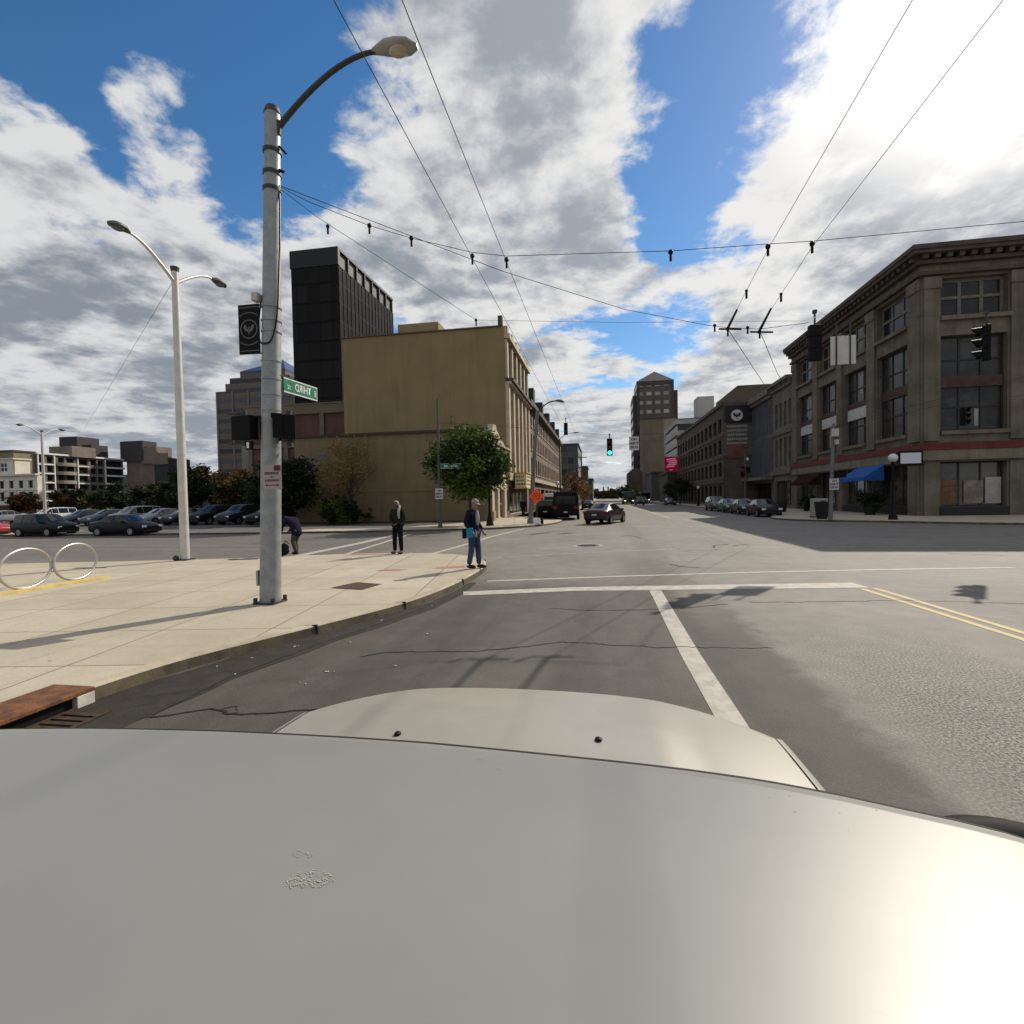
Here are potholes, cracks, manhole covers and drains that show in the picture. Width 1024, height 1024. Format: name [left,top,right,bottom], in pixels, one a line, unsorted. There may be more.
utility cover [332,582,380,590]
crack [150,706,317,717]
